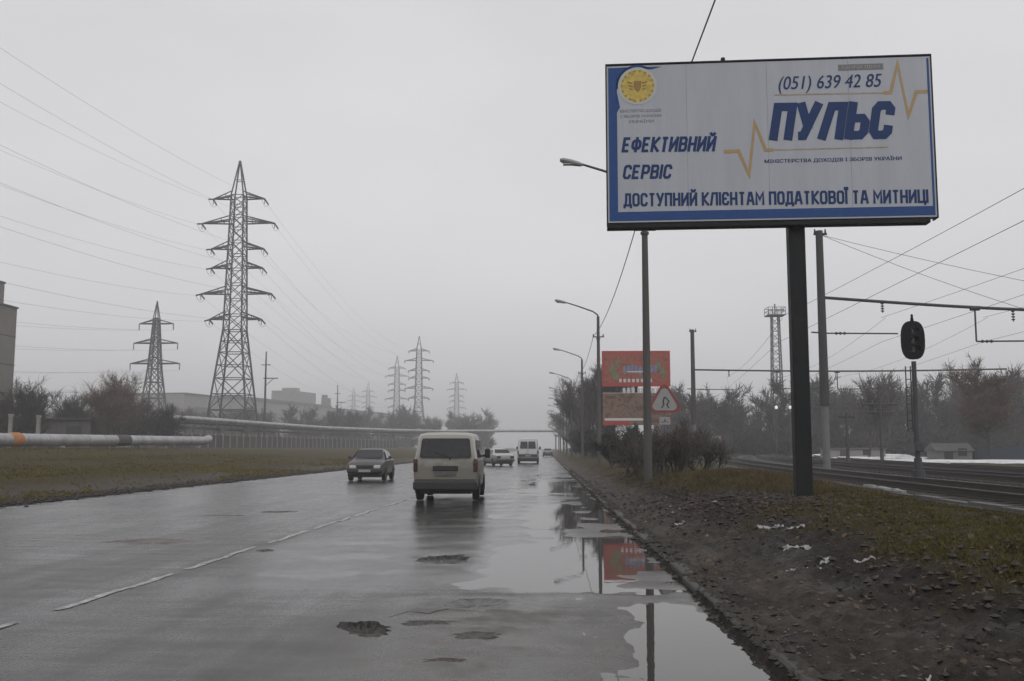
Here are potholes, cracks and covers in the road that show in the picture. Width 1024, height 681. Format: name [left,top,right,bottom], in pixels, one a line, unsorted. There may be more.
pothole [452,631,501,640]
crack [391,609,458,617]
pothole [416,554,470,564]
pothole [336,621,391,637]
